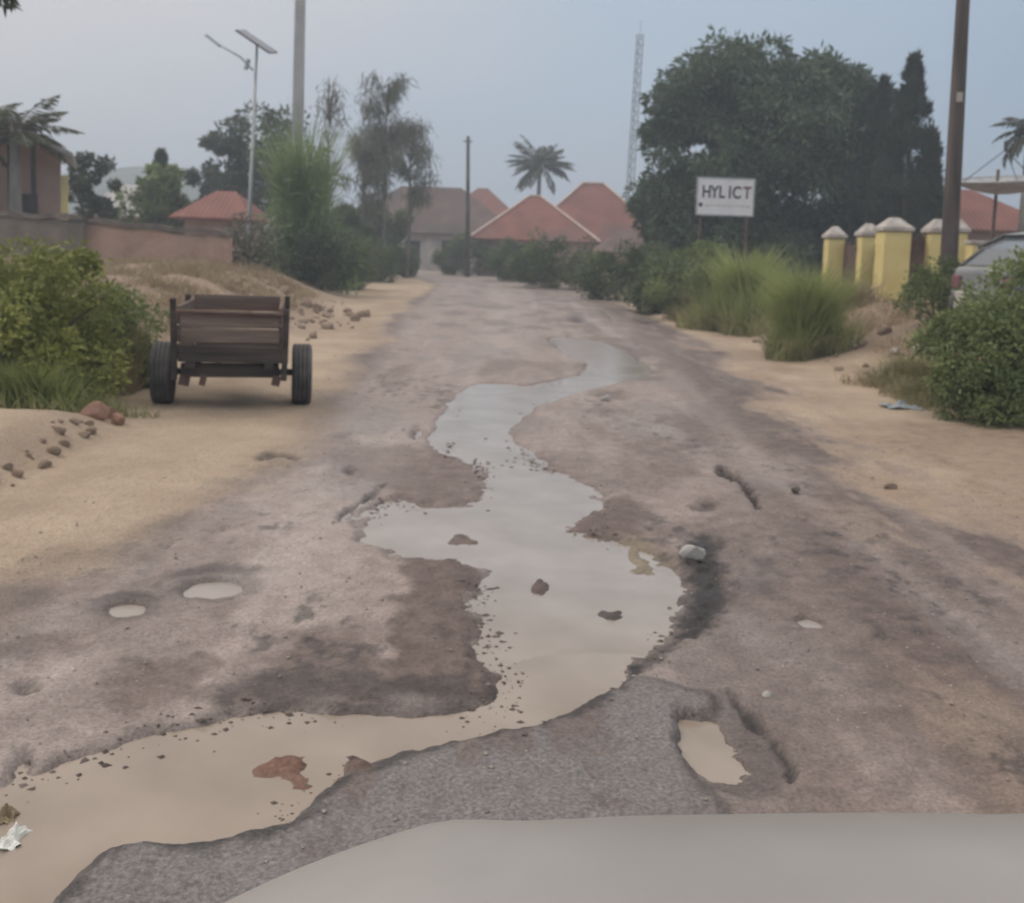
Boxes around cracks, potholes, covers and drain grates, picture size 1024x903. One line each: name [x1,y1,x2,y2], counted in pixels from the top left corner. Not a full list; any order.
pothole [0,652,646,903]
pothole [337,464,360,476]
crack [713,464,763,512]
pothole [175,575,252,599]
crack [725,688,802,784]
pothole [669,688,787,800]
pothole [405,423,430,440]
pothole [341,437,692,680]
pothole [101,597,153,617]
